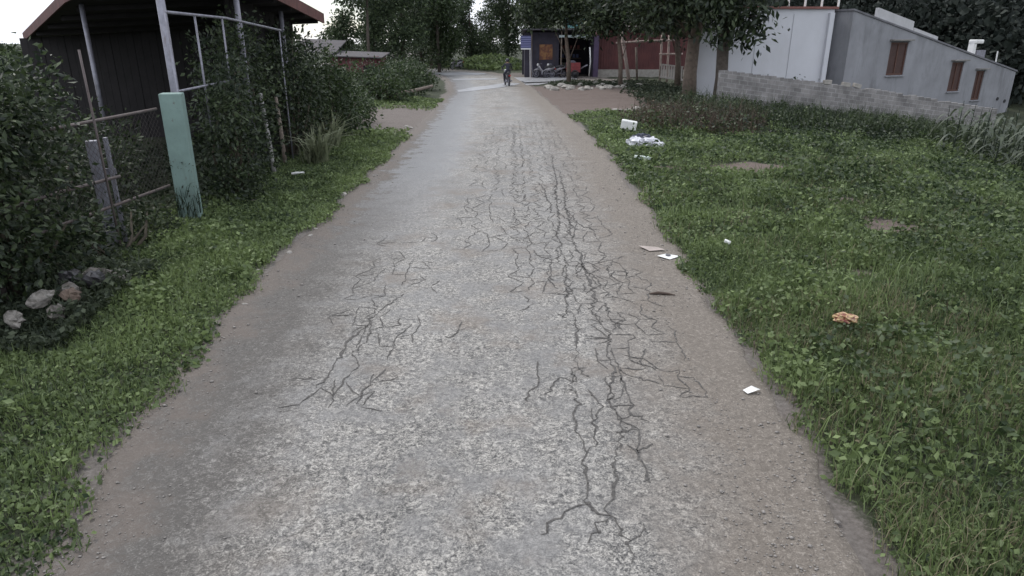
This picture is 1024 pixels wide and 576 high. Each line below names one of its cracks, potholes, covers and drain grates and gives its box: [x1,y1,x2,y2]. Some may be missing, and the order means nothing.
crack [508,120,708,563]
crack [278,234,440,411]
crack [453,128,534,251]
